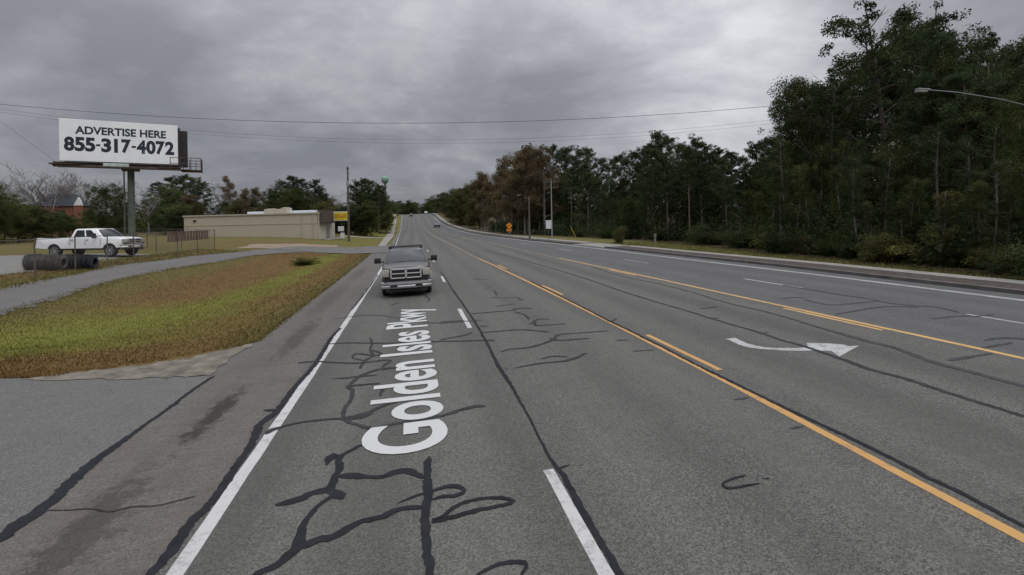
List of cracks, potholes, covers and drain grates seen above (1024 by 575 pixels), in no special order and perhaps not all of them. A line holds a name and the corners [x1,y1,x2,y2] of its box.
crack [948,337,1024,361]
crack [55,495,197,512]
crack [298,274,654,379]
